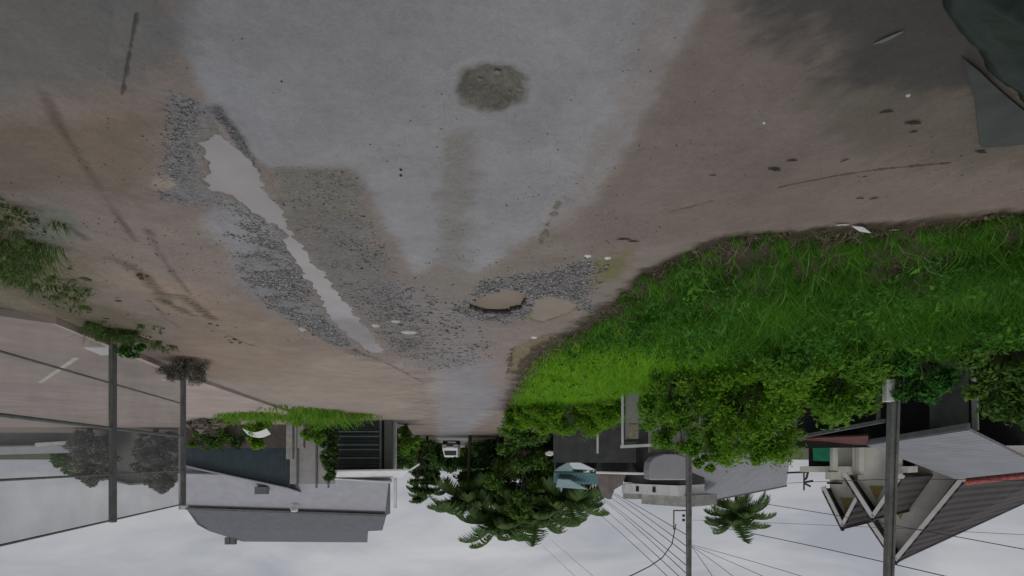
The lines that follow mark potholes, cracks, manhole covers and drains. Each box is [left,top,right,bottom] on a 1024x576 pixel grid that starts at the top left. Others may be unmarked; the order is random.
pothole [182,115,388,355]
pothole [462,287,534,316]
crack [659,195,723,216]
crack [767,156,966,192]
